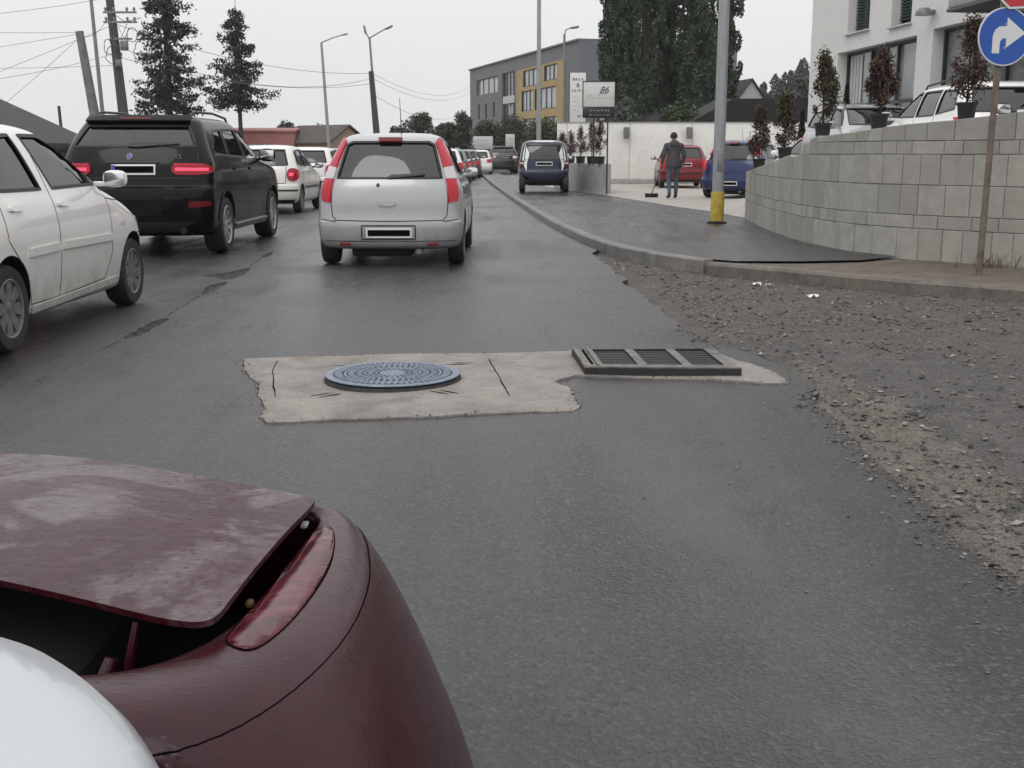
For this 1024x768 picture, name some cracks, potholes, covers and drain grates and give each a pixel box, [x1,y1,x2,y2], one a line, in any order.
manhole cover [324,361,462,393]
drain grate [572,347,742,376]
